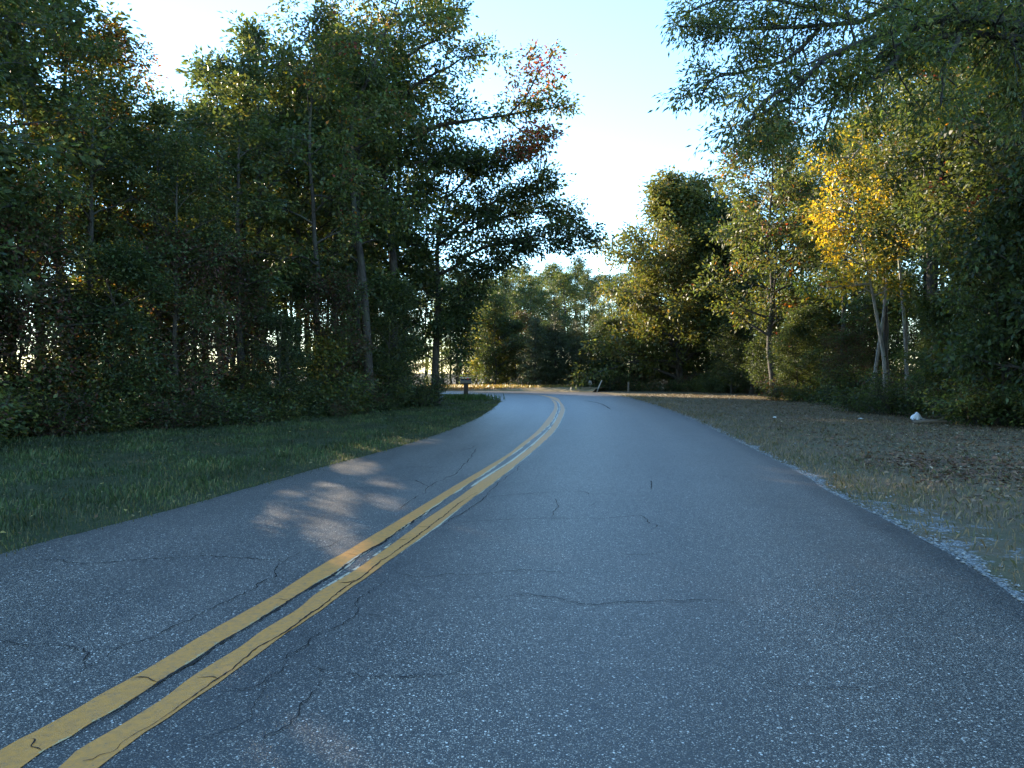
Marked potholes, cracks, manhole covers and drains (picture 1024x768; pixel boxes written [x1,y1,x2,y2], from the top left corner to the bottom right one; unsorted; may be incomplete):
crack [7,446,658,760]
crack [502,594,717,605]
